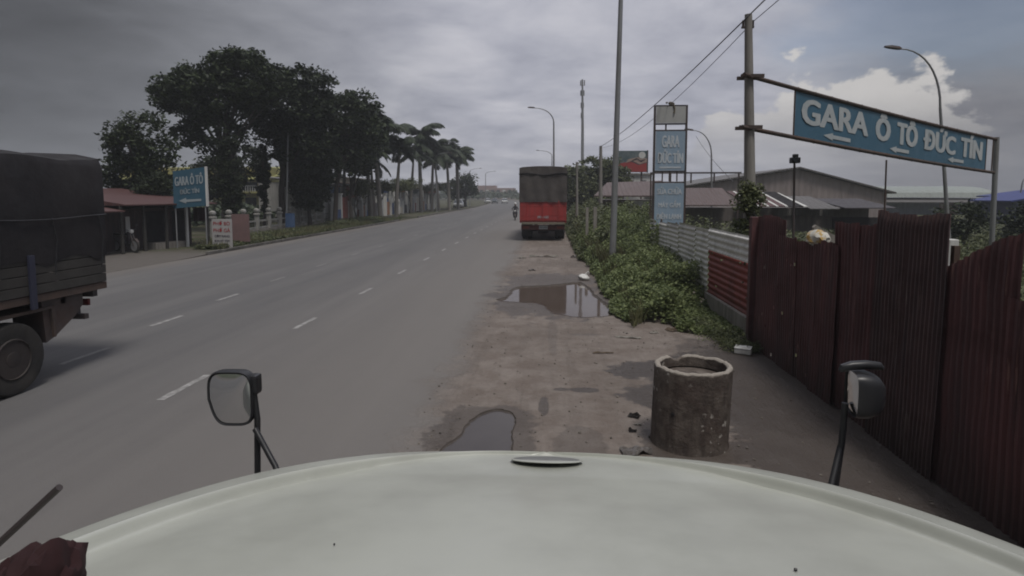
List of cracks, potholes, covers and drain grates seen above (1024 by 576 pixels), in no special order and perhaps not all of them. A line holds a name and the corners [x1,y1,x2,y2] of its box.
pothole [496,282,614,318]
pothole [439,409,516,451]
